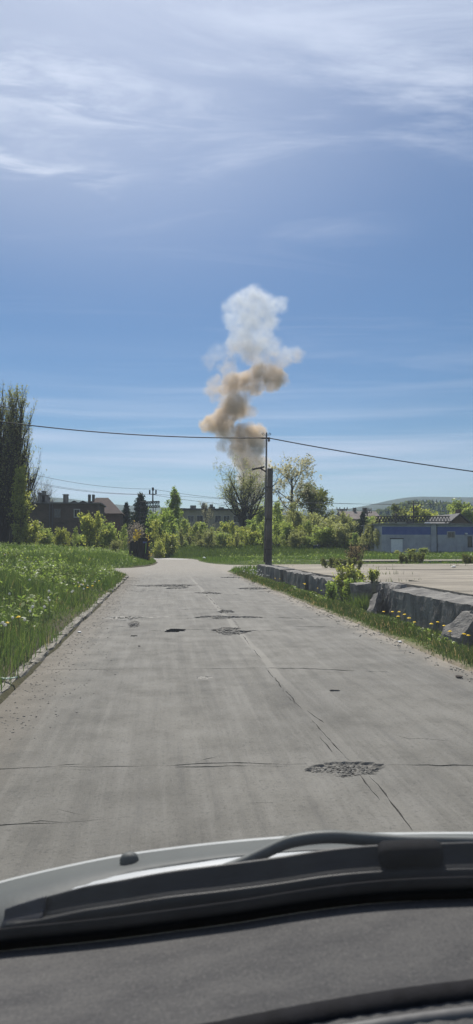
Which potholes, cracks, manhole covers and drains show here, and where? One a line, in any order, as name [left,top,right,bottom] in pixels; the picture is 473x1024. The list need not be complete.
pothole [305,761,404,778]
crack [49,599,413,831]
pothole [212,627,258,636]
crack [6,757,473,770]
